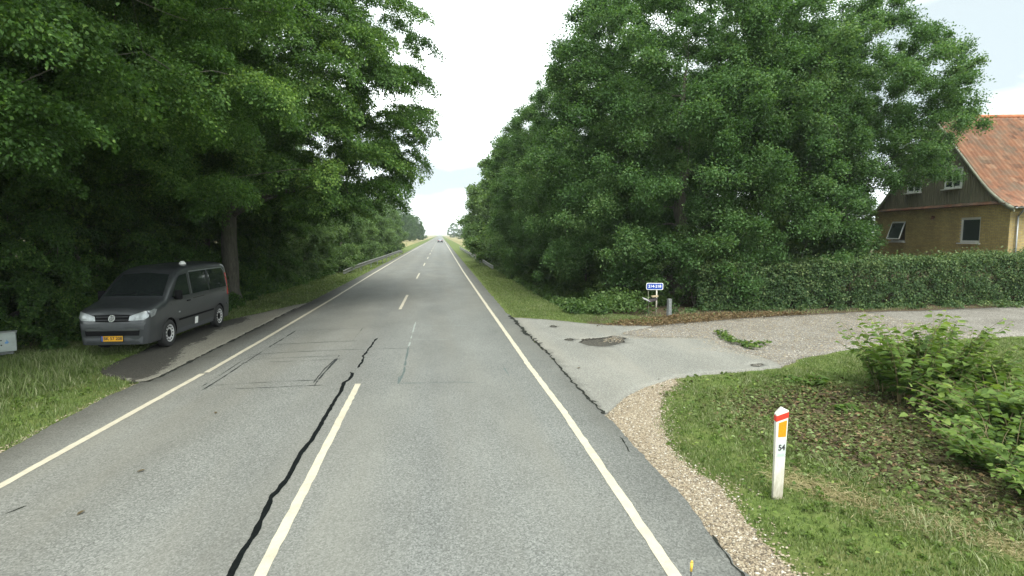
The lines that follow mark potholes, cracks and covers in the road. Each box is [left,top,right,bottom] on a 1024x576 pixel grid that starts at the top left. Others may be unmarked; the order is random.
pothole [579,336,626,347]
crack [203,322,475,576]
